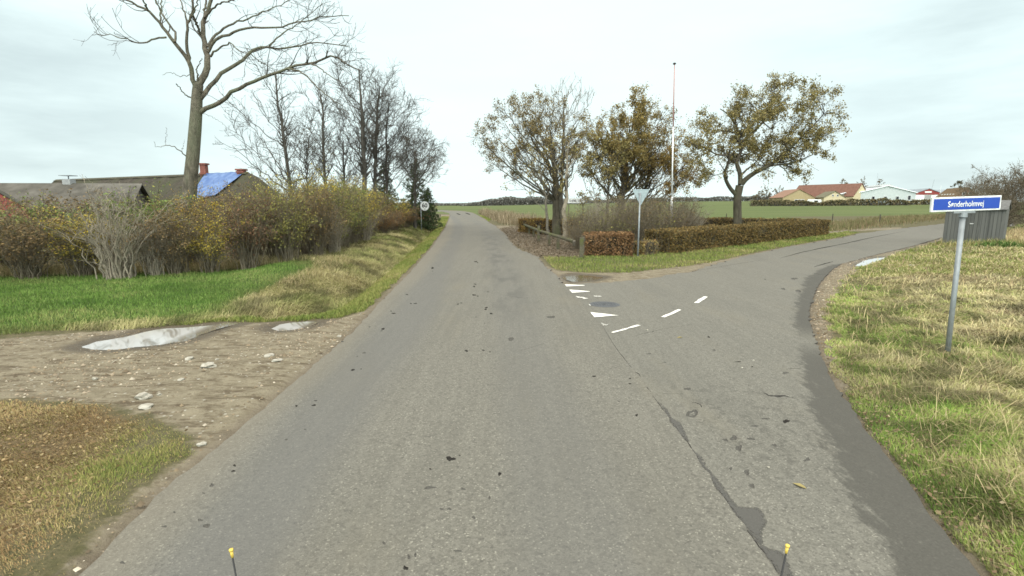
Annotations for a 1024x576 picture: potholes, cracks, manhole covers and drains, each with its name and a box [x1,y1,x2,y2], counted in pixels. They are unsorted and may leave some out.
crack [782,231,903,275]
